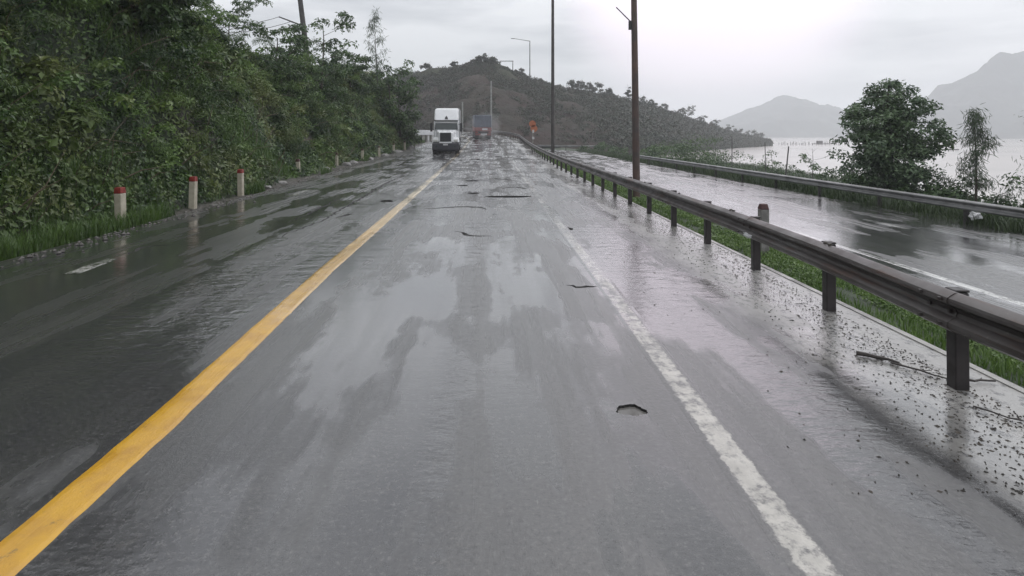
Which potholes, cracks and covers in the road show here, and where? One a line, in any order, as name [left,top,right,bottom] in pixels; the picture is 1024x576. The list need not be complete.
pothole [616,404,648,416]
crack [444,170,526,189]
